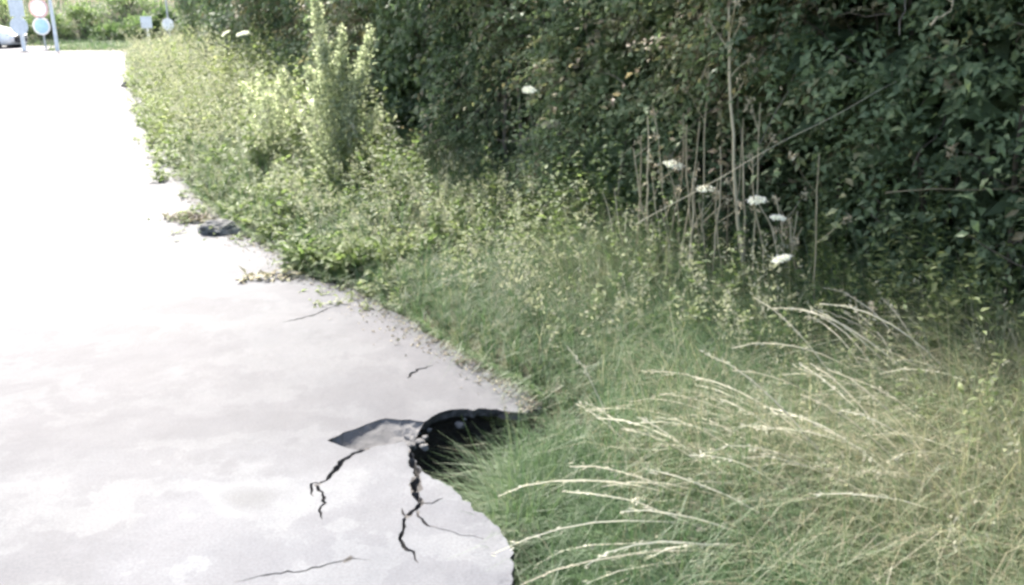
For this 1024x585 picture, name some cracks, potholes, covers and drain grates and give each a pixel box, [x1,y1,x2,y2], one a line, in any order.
crack [398,450,483,563]
crack [310,448,370,520]
crack [236,555,371,582]
pothole [332,416,520,514]
